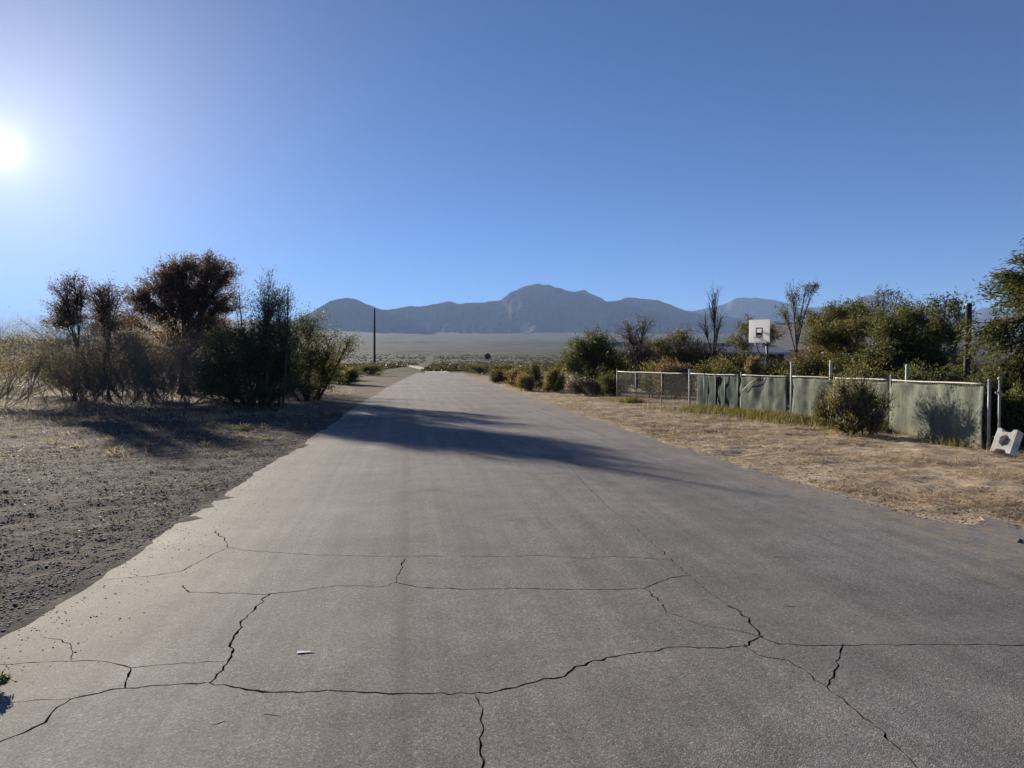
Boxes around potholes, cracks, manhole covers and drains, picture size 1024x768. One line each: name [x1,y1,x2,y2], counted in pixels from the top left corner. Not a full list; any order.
crack [0,468,1024,768]
